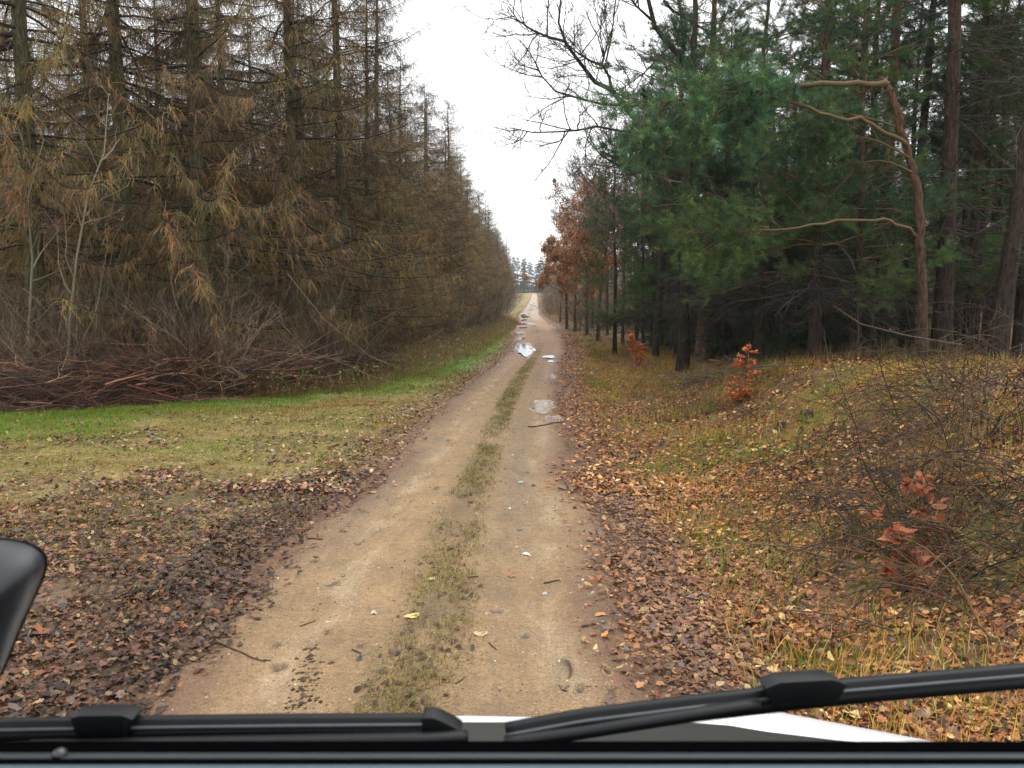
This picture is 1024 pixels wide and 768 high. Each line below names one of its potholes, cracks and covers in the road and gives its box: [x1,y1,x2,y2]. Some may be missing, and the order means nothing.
pothole [530,400,556,414]
pothole [513,342,536,358]
